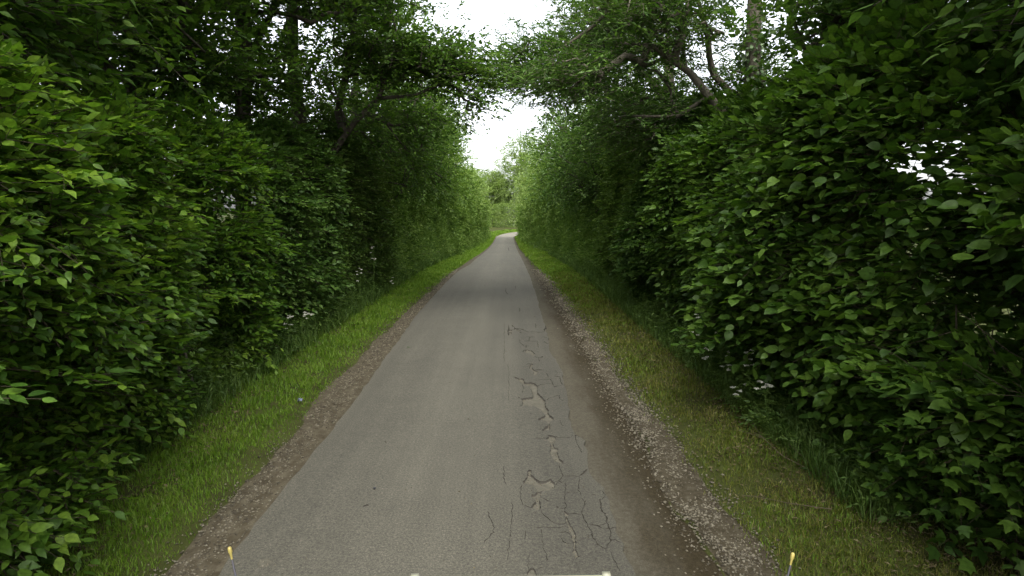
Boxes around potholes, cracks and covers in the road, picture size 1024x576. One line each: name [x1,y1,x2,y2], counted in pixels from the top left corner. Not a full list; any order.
pothole [546,435,564,464]
pothole [515,377,554,431]
pothole [523,470,555,510]
crack [484,286,620,571]
